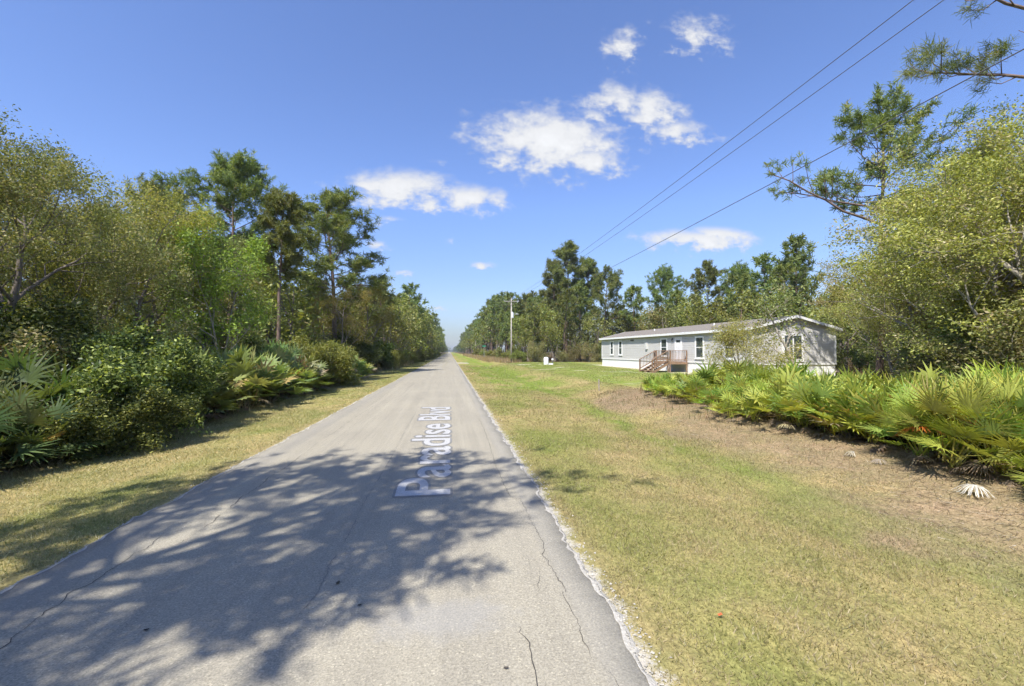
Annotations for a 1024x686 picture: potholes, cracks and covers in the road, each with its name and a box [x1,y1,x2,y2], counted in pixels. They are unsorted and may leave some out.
crack [478,418,619,686]
crack [0,536,161,649]
